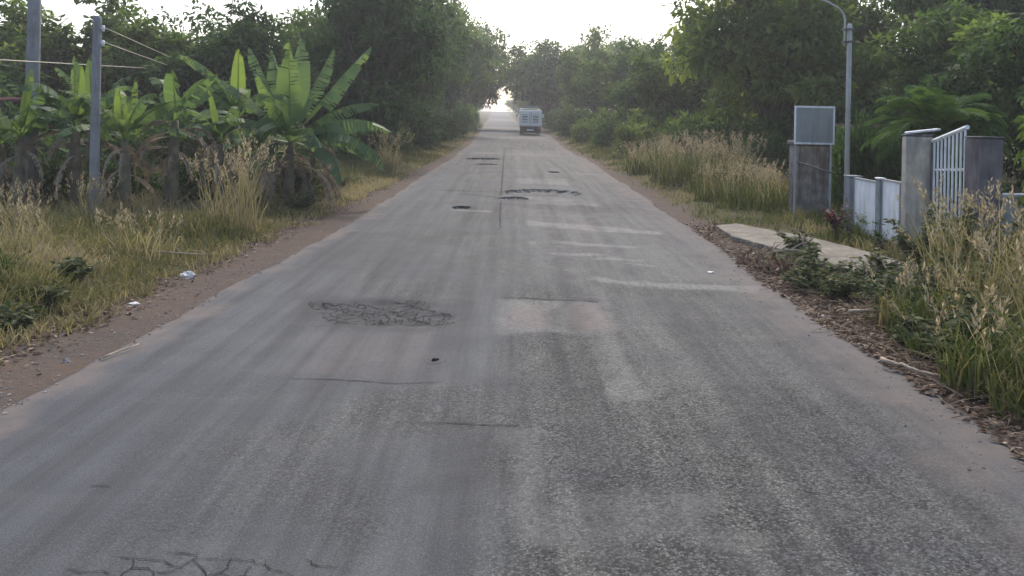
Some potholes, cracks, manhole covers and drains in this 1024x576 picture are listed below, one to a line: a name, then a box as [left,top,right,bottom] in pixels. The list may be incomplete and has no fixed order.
pothole [499,188,588,197]
crack [72,552,334,576]
